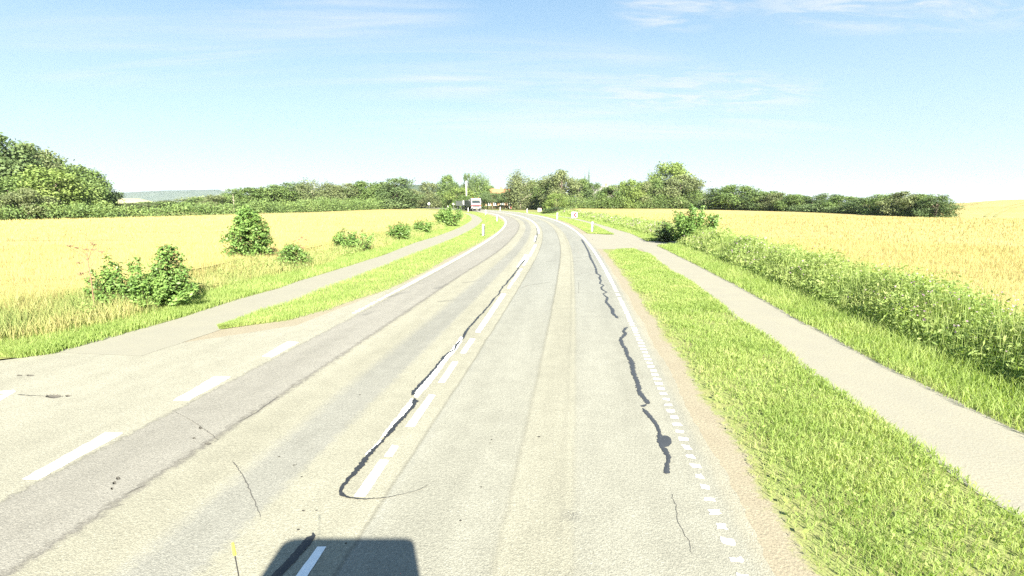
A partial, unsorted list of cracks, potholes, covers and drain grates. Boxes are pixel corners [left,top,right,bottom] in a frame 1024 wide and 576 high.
crack [233,462,261,517]
